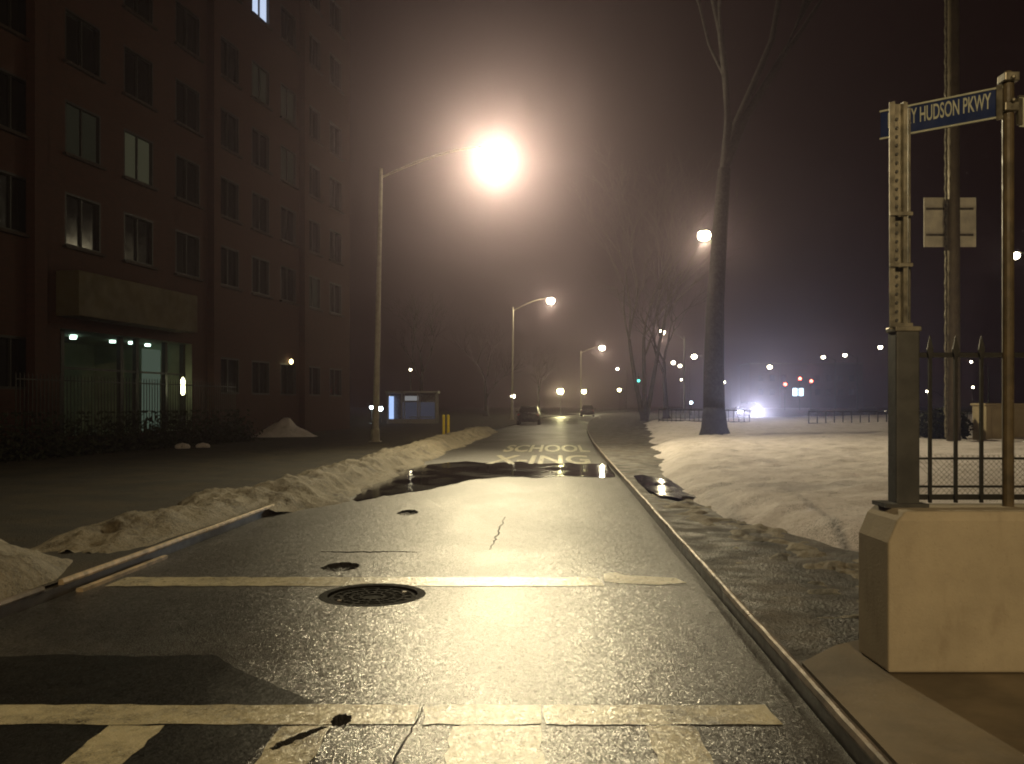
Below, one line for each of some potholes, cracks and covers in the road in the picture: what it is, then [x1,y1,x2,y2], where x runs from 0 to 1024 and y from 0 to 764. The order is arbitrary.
crack [392,705,424,764]
pothole [331,714,352,727]
manhole cover [319,584,426,607]
pothole [321,562,359,572]
